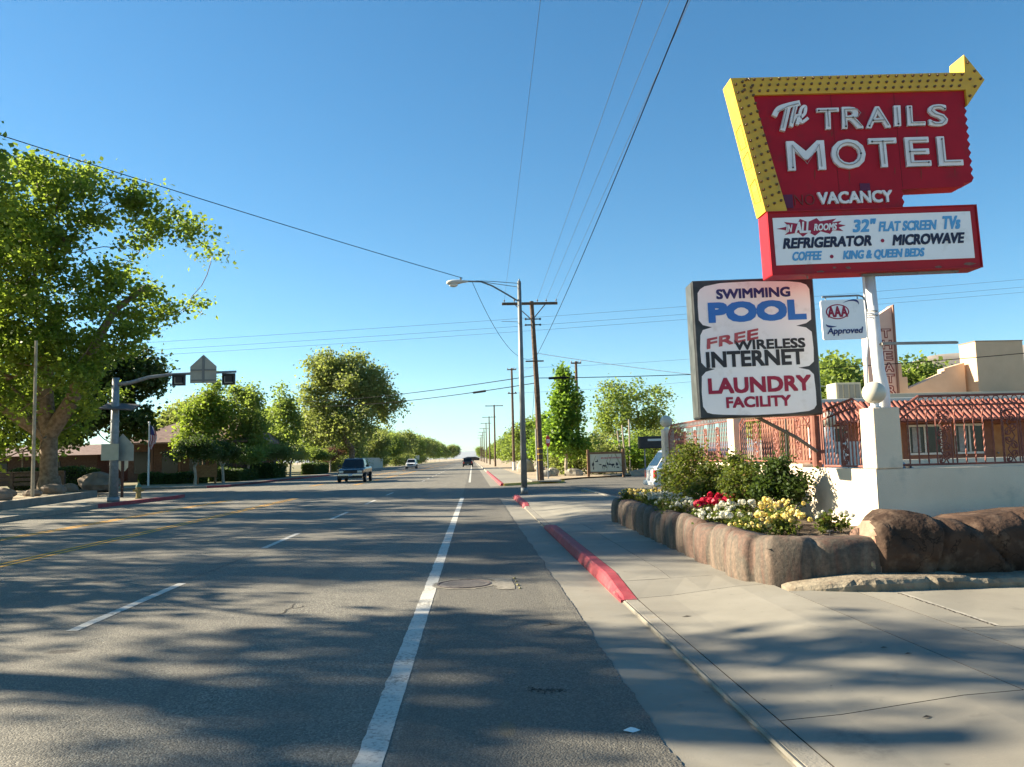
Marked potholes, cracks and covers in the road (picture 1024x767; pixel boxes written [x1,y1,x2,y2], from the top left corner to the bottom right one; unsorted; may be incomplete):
manhole cover [432,577,521,589]
